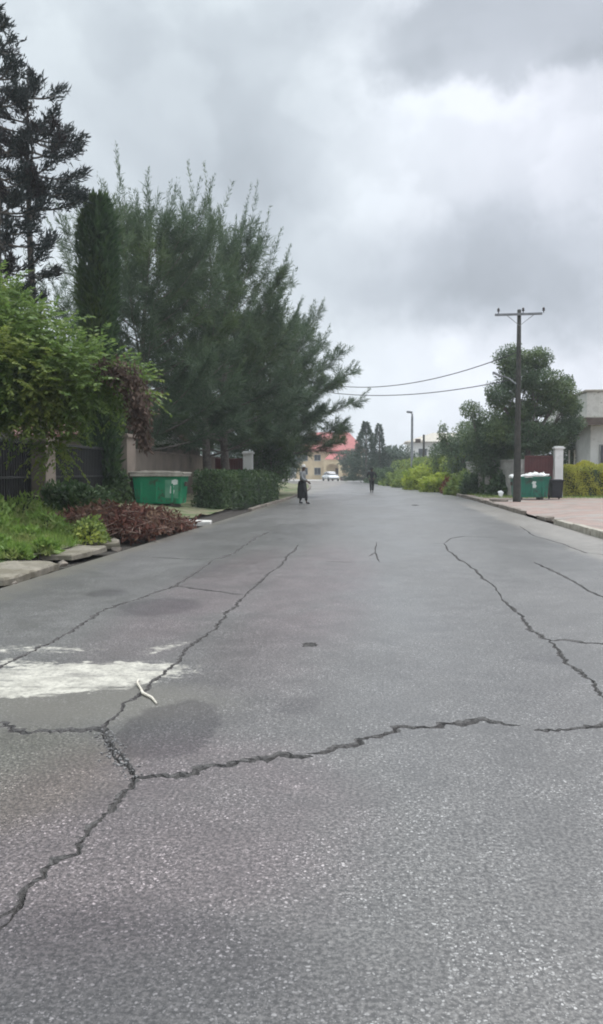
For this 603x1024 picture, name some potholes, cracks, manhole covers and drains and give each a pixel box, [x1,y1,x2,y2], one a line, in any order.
crack [0,532,603,930]
